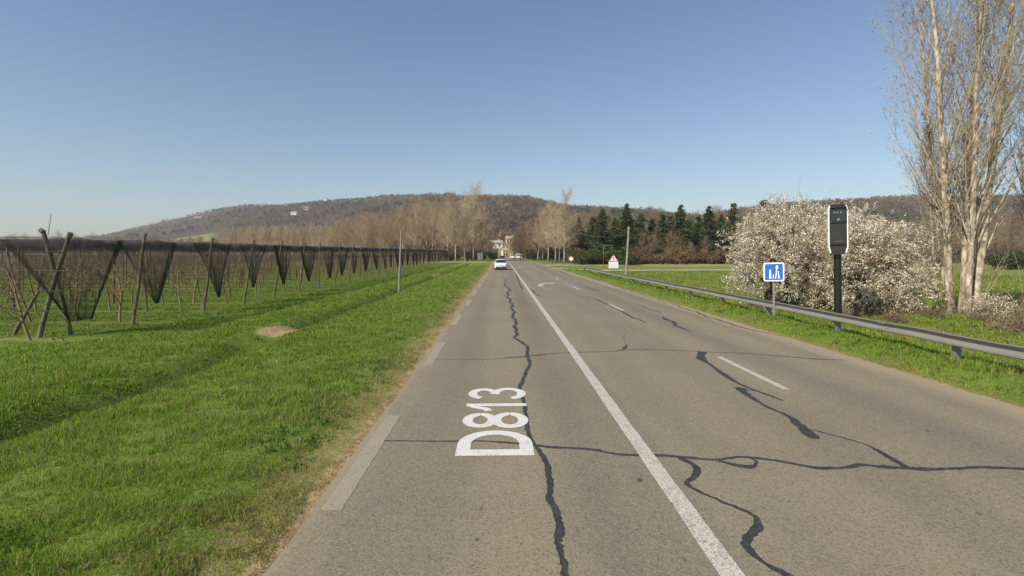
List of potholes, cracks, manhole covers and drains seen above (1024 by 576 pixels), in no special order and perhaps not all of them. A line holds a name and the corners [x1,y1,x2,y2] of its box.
crack [384,274,1024,576]
